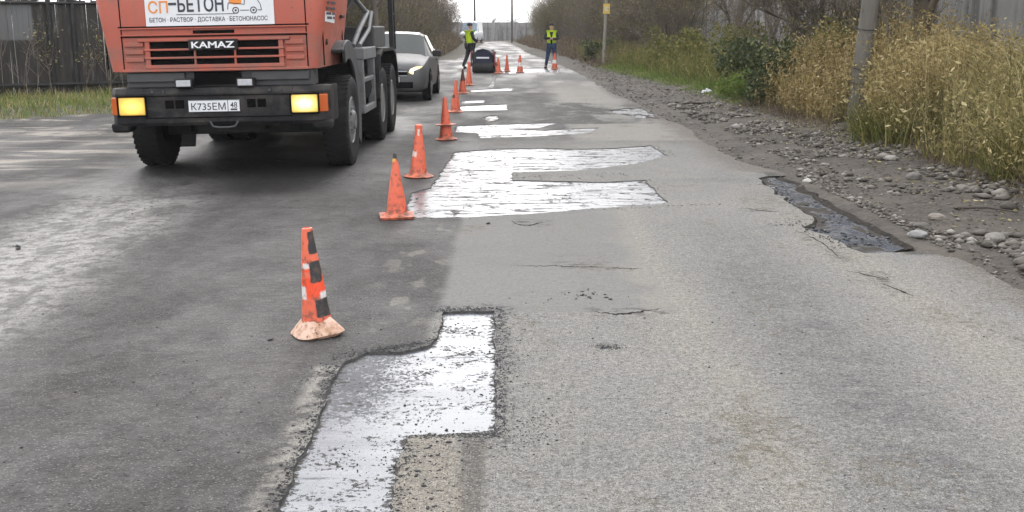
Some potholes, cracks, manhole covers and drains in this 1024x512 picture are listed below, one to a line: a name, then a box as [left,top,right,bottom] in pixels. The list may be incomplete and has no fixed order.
pothole [275,311,499,512]
pothole [455,123,598,138]
pothole [406,145,668,218]
pothole [759,176,914,253]
pothole [610,108,660,119]
crack [745,208,913,296]
